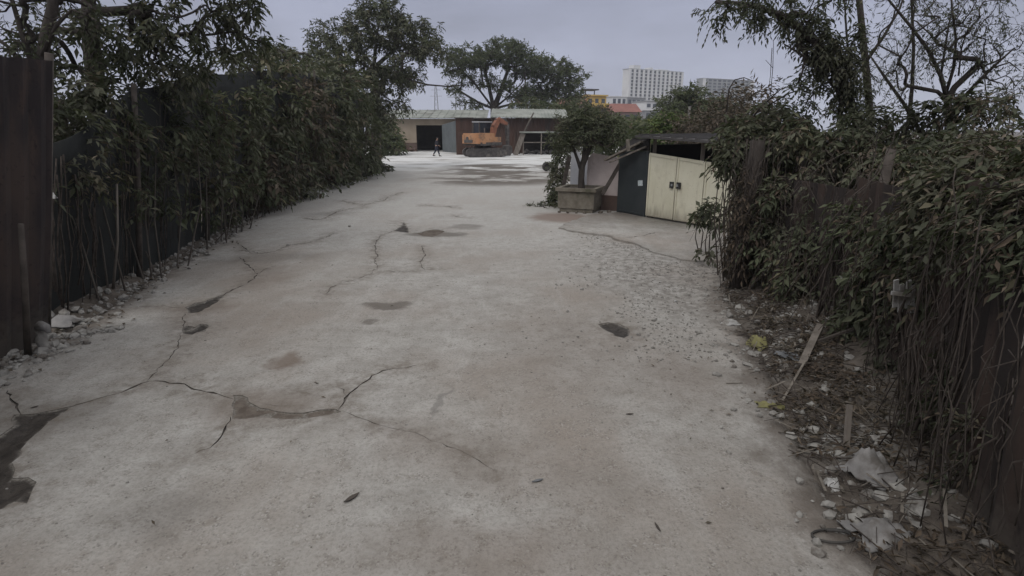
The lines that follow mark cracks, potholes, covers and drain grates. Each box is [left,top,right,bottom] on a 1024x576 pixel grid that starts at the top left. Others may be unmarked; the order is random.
pothole [599,323,630,338]
pothole [0,406,72,509]
pothole [232,395,340,419]
pothole [182,324,209,335]
crack [327,232,426,293]
crack [6,212,336,451]
pothole [185,295,224,313]
